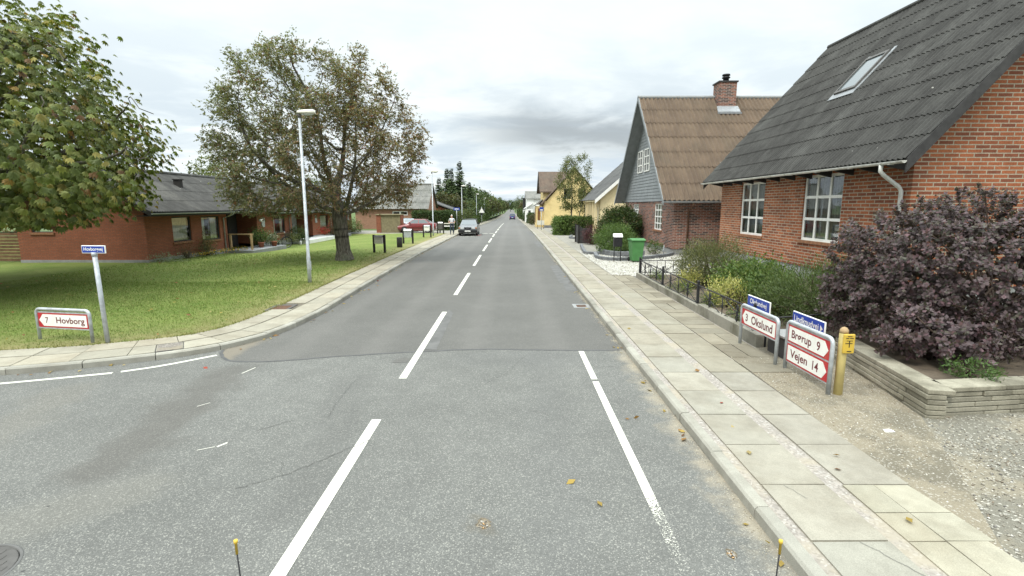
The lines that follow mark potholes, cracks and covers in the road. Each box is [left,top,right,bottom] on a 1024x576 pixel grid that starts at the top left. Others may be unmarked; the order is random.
manhole cover [0,544,24,576]
pothole [476,518,491,530]
crack [235,440,369,489]
utility cover [265,304,298,312]
